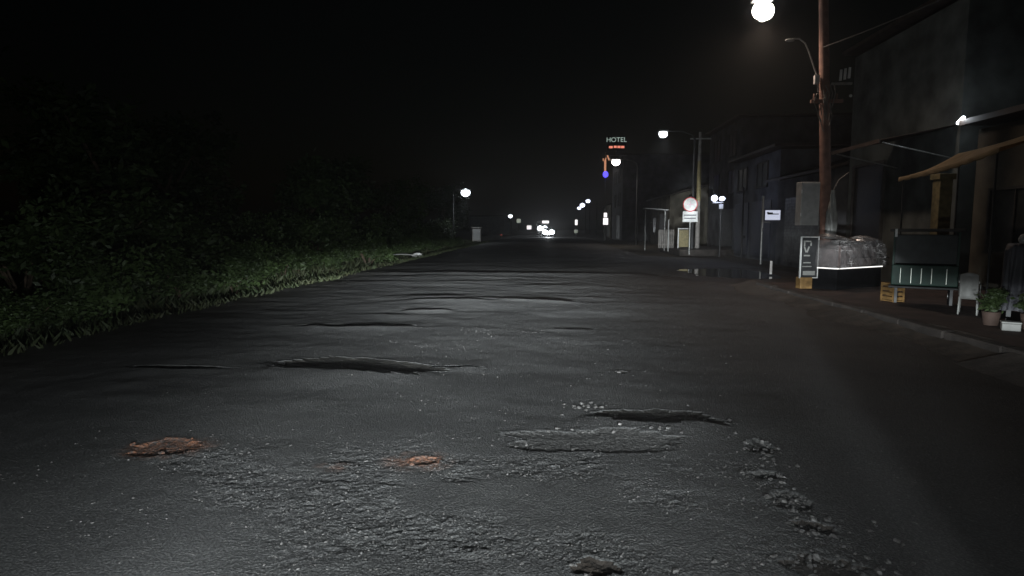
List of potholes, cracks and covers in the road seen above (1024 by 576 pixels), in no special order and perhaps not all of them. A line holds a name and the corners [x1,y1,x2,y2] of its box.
pothole [755,486,825,518]
pothole [473,296,599,304]
pothole [735,436,785,457]
pothole [492,422,694,456]
pothole [262,355,456,377]
pothole [580,407,739,428]
pothole [737,468,790,481]
pothole [778,516,850,539]
pothole [562,552,633,576]
